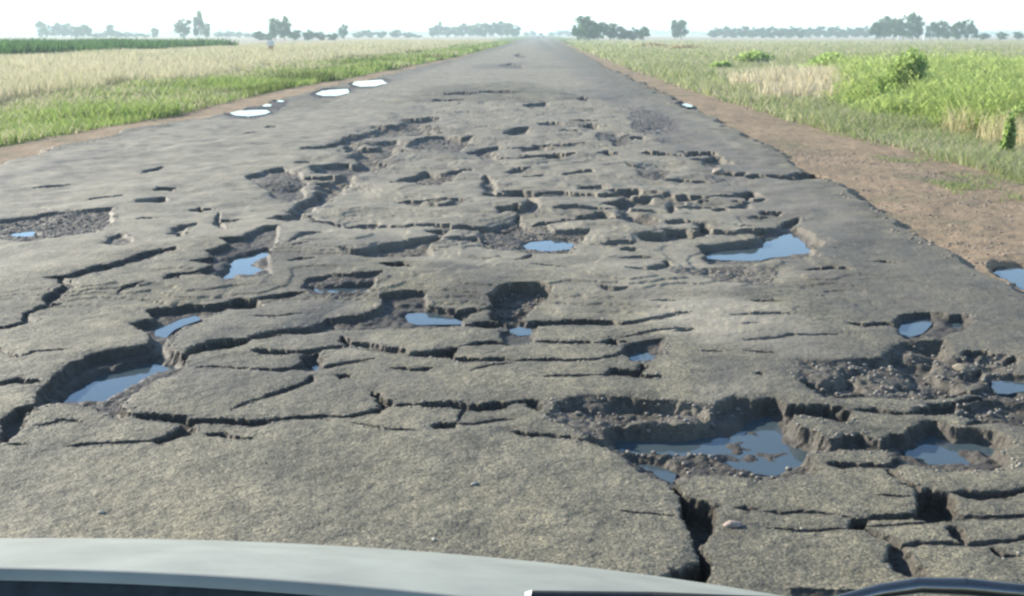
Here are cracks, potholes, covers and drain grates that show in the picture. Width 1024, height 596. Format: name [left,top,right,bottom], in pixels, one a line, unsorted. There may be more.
crack [810,458,922,498]
crack [731,298,894,353]
pothole [578,395,822,489]
pothole [817,420,1015,471]
pothole [223,99,290,119]
pothole [696,218,825,265]
pothole [796,340,1015,401]
crack [784,350,1020,427]
pothole [474,221,591,254]
pothole [244,167,310,202]
pothole [955,400,1024,427]
crack [864,525,1024,578]
